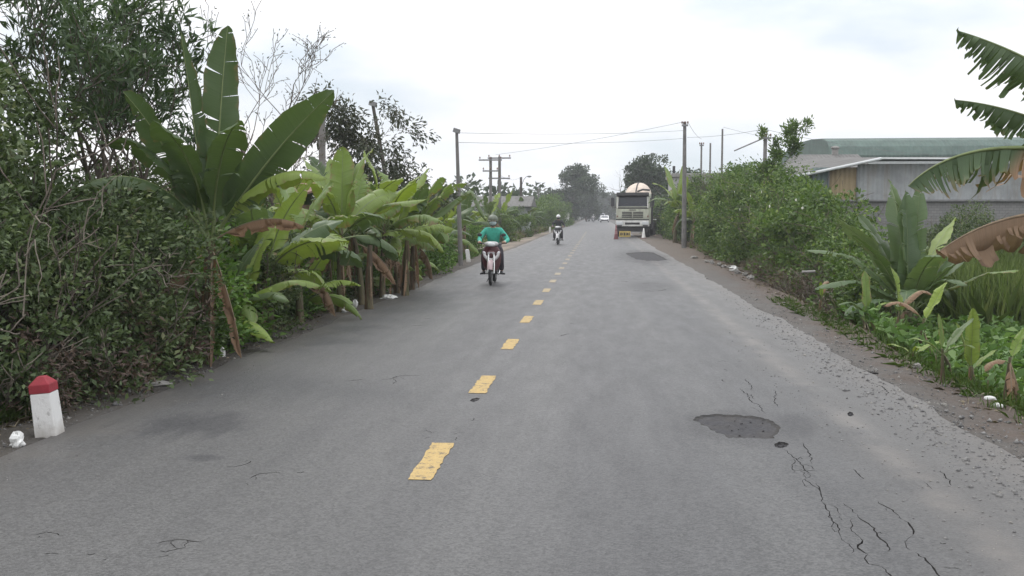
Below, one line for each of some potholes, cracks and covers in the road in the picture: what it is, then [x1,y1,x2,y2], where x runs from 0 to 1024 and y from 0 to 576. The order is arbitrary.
crack [160,539,203,557]
pothole [693,414,781,439]
crack [786,443,962,576]
